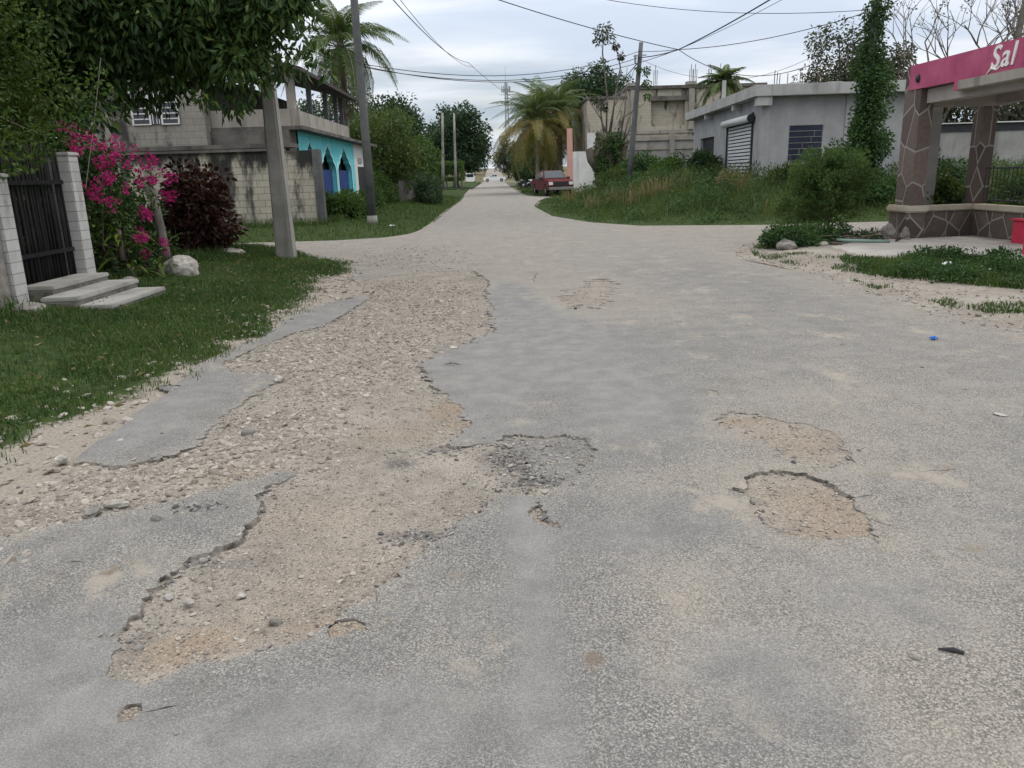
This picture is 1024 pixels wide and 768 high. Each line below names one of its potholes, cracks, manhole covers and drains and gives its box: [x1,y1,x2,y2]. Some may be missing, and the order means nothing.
pothole [714,411,856,469]
pothole [496,434,598,487]
pothole [527,502,563,530]
pothole [117,703,142,723]
pothole [552,279,623,309]
pothole [729,470,879,544]
pothole [0,270,554,685]
